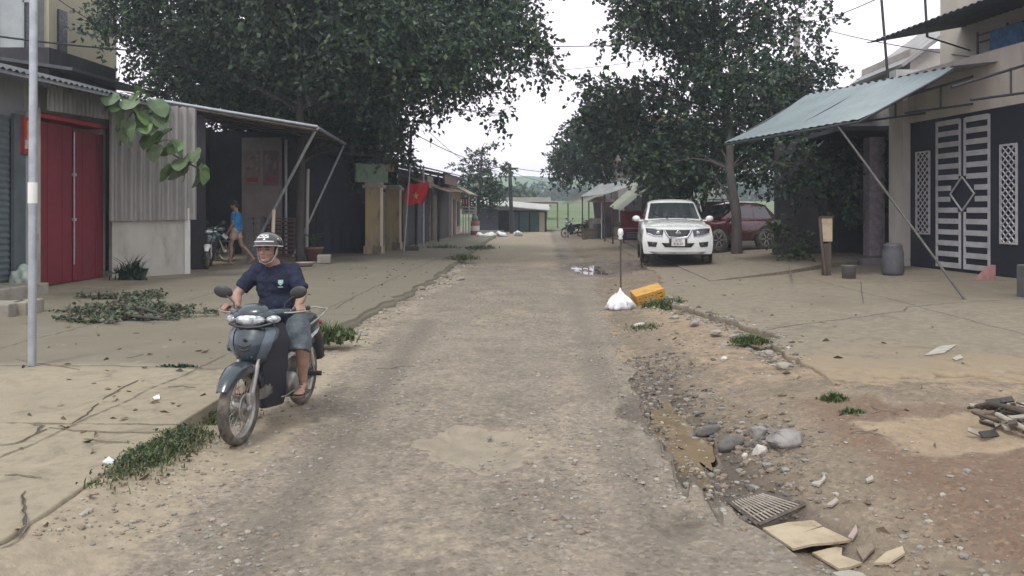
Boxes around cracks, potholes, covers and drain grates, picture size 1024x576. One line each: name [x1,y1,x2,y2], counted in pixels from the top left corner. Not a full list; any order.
crack [0,474,41,546]
crack [0,423,47,446]
drain grate [727,491,806,527]
pothole [641,392,724,525]
crack [72,380,138,443]
